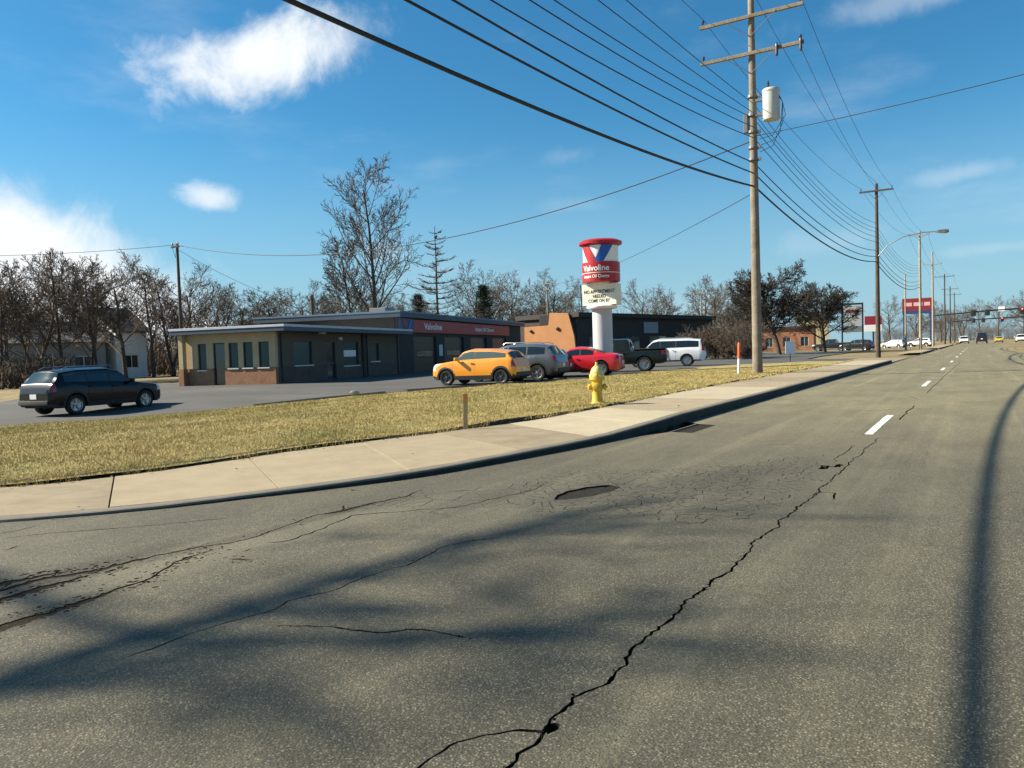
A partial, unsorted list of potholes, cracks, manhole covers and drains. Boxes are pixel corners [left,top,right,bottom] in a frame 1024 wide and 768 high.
pothole [554,485,619,500]
drain grate [634,422,715,437]
crack [4,518,225,551]
crack [109,438,878,768]
